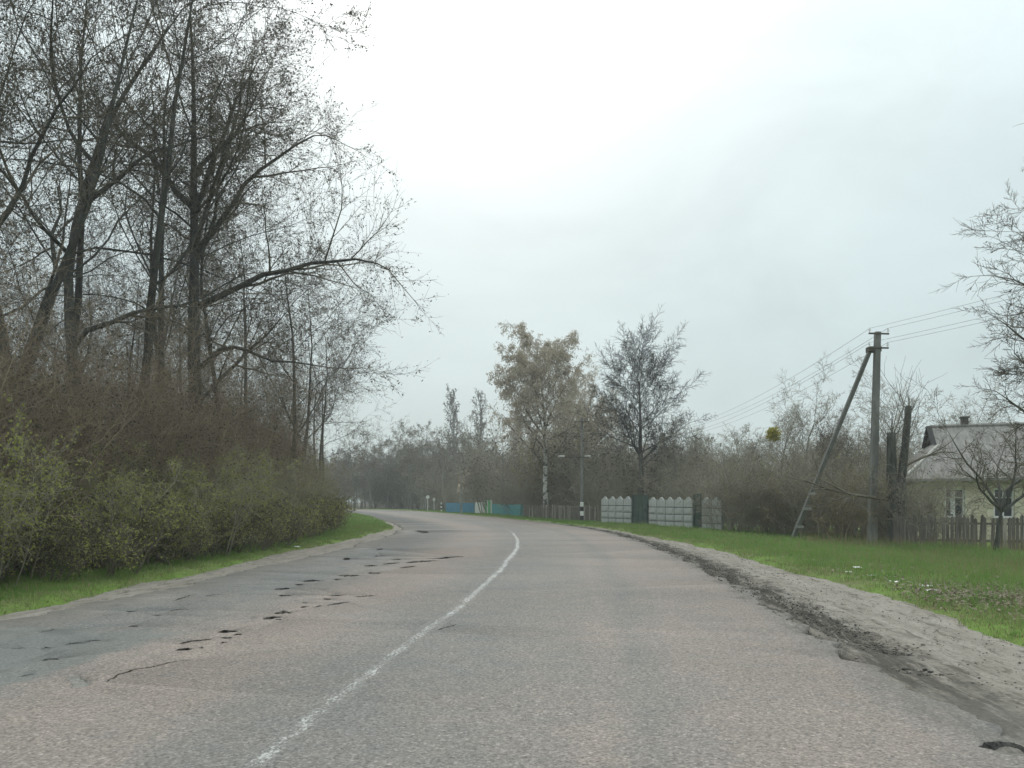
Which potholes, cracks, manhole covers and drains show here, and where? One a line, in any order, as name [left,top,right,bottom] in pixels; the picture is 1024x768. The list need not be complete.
crack [109,630,241,680]
pothole [979,741,1024,753]
